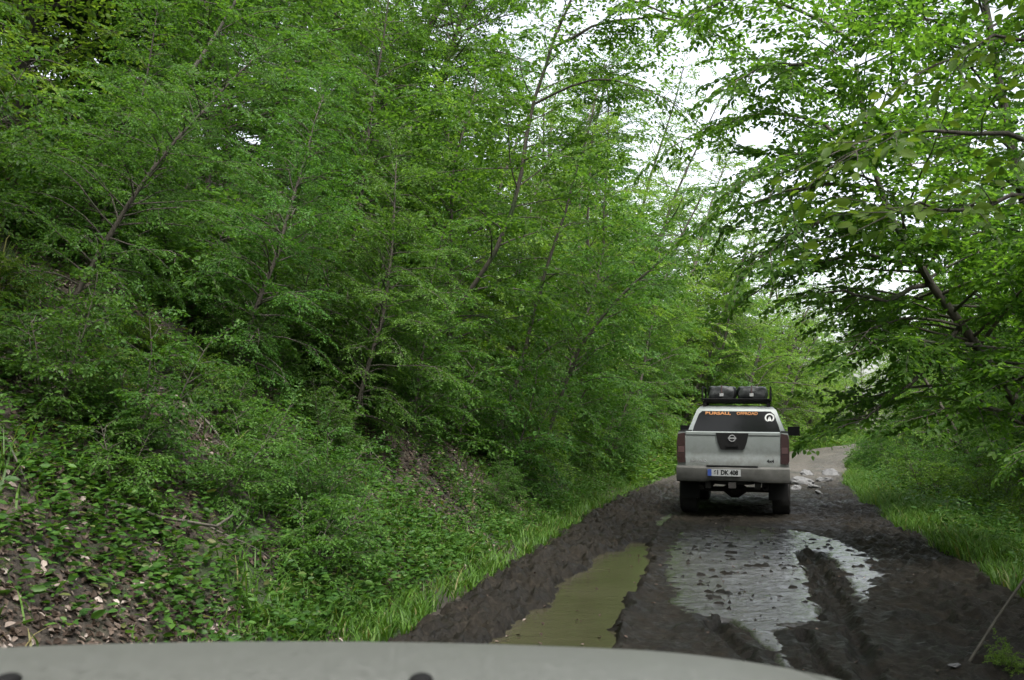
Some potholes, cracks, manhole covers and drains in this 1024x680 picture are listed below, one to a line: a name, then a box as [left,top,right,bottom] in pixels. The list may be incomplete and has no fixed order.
pothole [660,525,891,672]
pothole [459,533,663,649]
